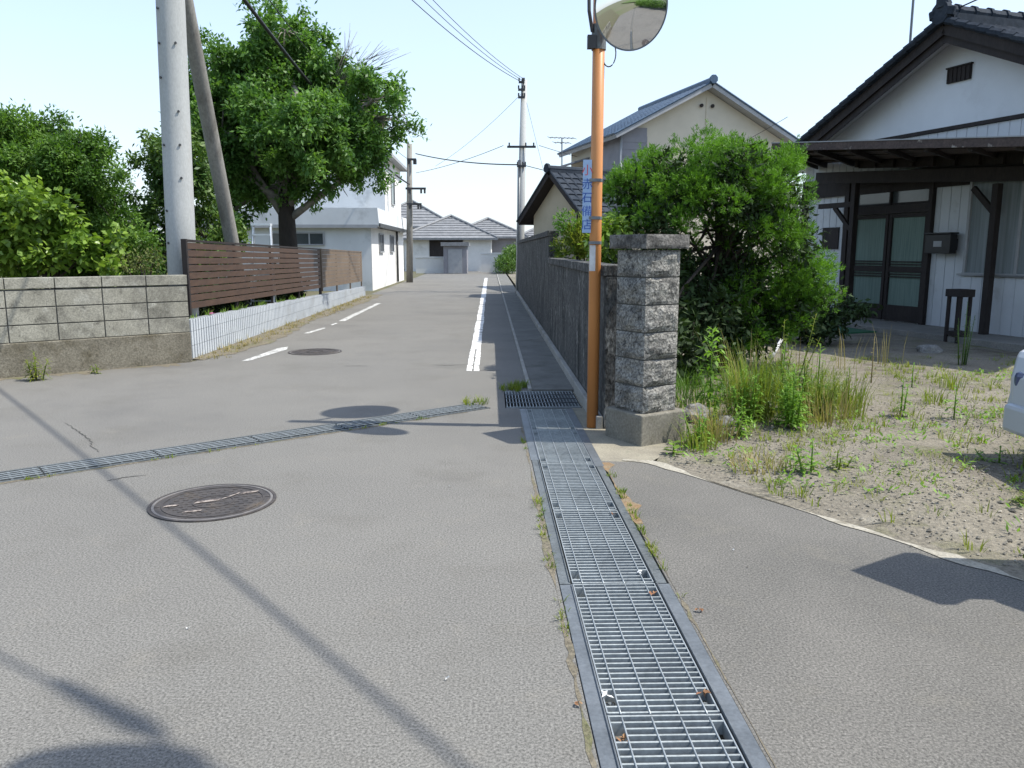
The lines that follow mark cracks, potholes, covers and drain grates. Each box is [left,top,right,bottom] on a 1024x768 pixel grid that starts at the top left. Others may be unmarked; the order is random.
drain grate [526,409,576,431]
drain grate [407,403,489,418]
drain grate [0,466,44,482]
drain grate [541,463,617,513]
drain grate [505,391,581,408]
drain grate [151,436,261,459]
drain grate [248,423,348,443]
drain grate [607,713,749,768]
drain grate [38,450,161,476]
drain grate [532,431,593,467]
drain grate [573,583,720,715]
drain grate [332,413,420,430]
